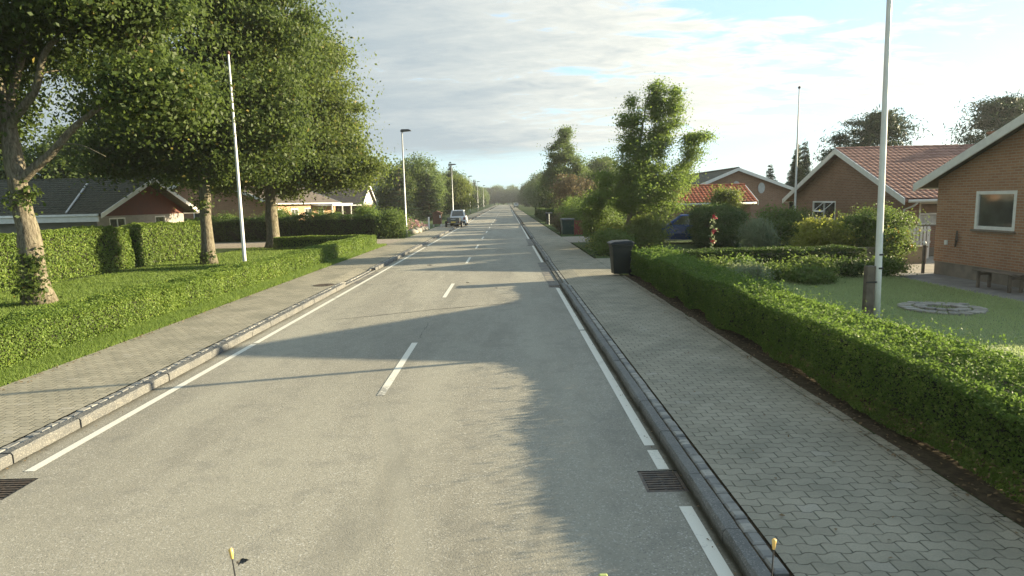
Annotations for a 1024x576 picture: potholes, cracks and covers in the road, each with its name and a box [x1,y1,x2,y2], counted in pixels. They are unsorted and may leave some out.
drain grate [637,470,689,492]
drain grate [0,478,38,500]
